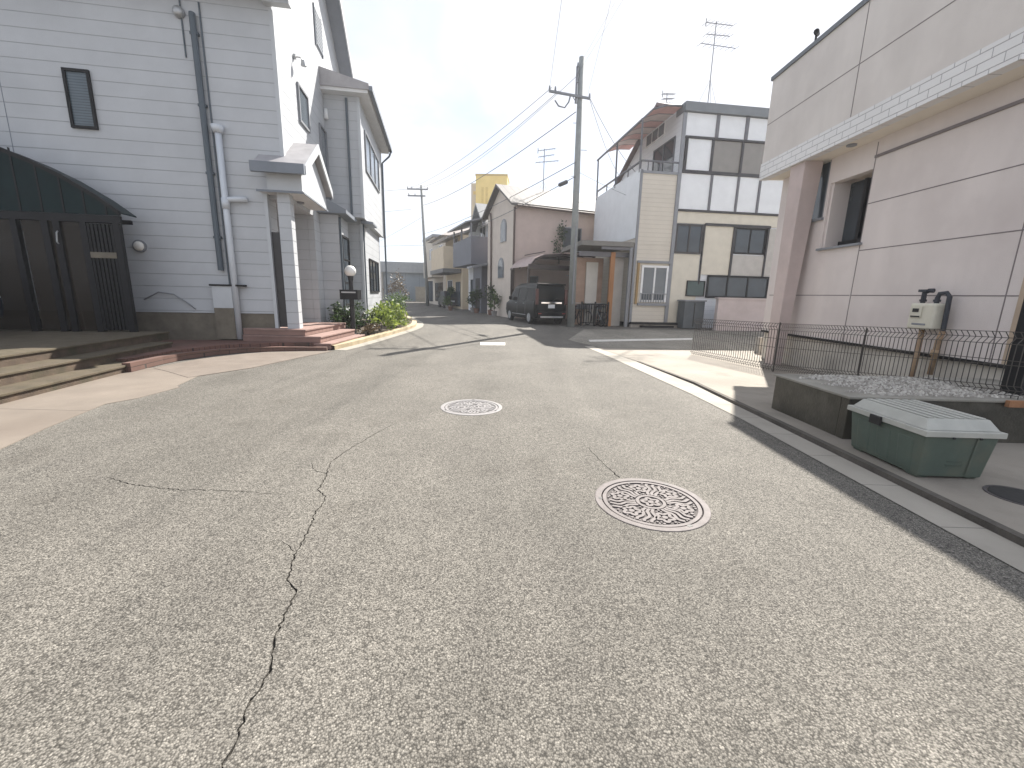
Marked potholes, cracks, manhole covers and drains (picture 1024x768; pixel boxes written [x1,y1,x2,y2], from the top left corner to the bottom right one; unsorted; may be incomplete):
manhole cover [982,485,1024,506]
crack [221,426,390,768]
manhole cover [595,478,711,532]
crack [111,478,270,494]
manhole cover [441,399,502,416]
